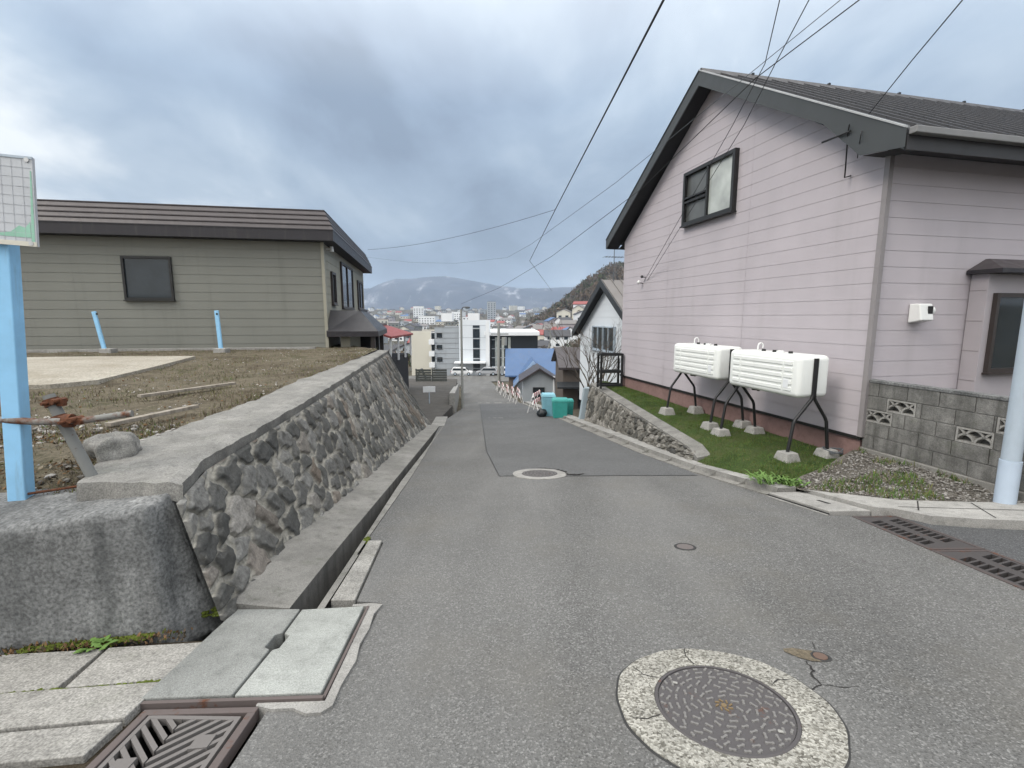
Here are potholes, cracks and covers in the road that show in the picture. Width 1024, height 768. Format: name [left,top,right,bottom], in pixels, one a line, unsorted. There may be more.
drain grate [852,516,985,550]
crack [632,648,787,719]
manhole cover [616,648,851,768]
manhole cover [513,468,566,480]
drain grate [86,707,260,768]
crack [806,642,859,690]
drain grate [931,549,1024,590]
